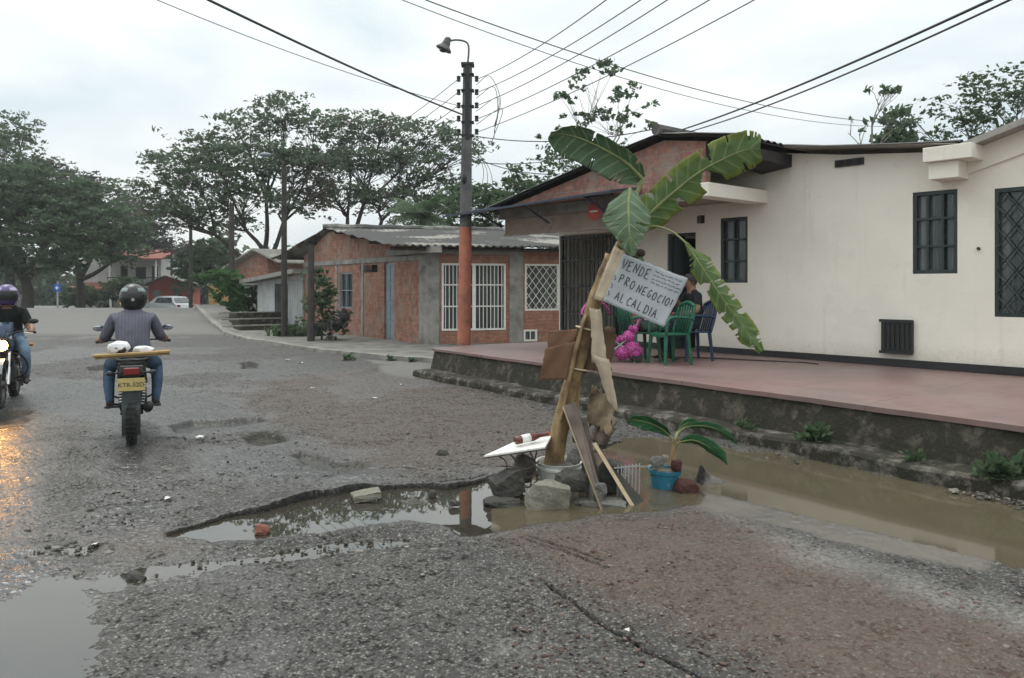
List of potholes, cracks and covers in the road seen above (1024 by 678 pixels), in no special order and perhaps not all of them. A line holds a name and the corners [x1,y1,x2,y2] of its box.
pothole [240,430,290,447]
pothole [236,361,260,369]
pothole [165,416,269,434]
pothole [163,440,709,544]
crack [520,535,709,678]
